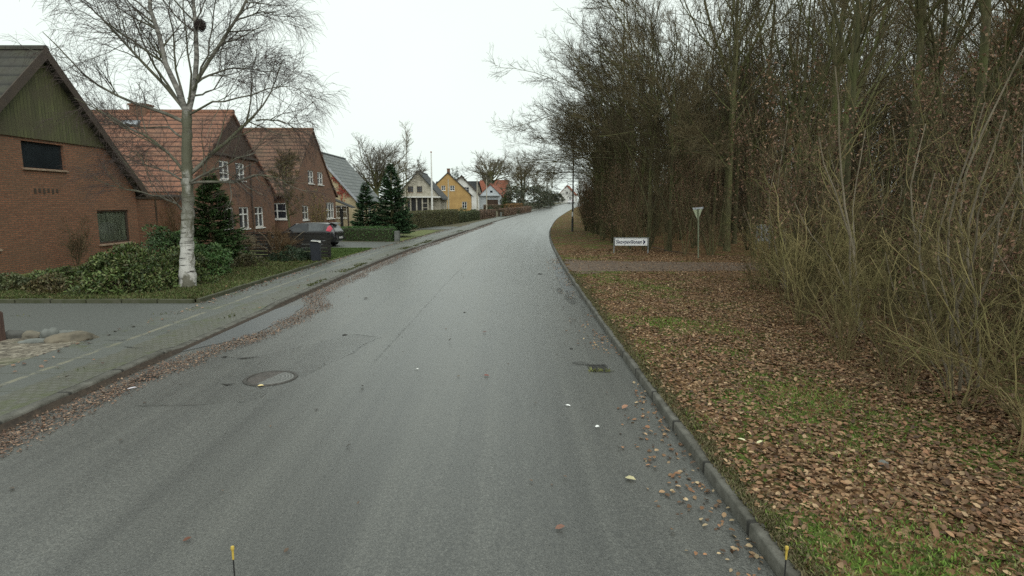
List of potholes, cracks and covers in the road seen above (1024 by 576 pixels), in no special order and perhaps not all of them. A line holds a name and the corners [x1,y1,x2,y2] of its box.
manhole cover [242,370,298,386]
drain grate [587,364,609,372]
